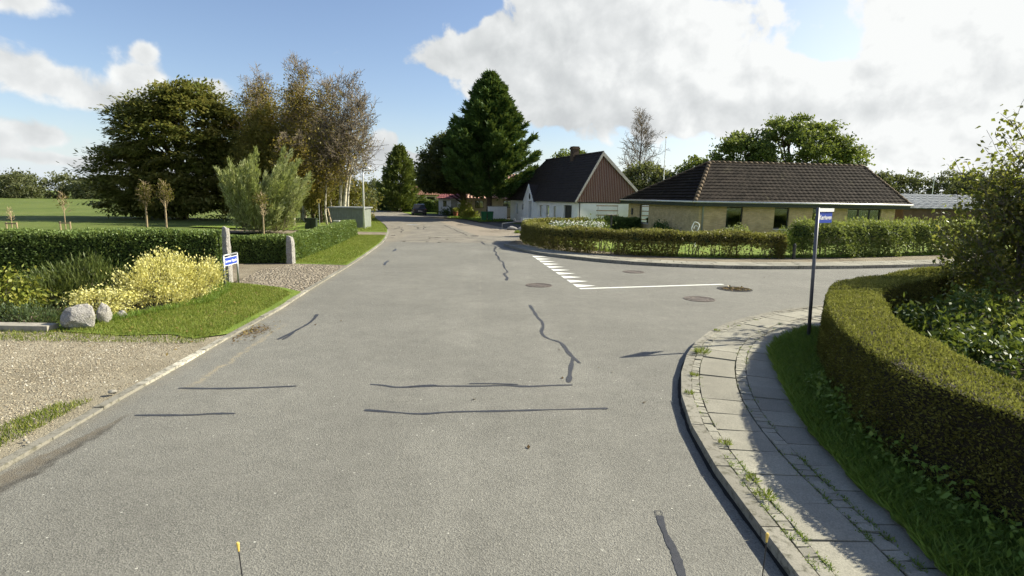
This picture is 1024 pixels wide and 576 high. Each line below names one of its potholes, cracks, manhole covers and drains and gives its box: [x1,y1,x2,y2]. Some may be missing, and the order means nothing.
crack [392,226,509,280]
